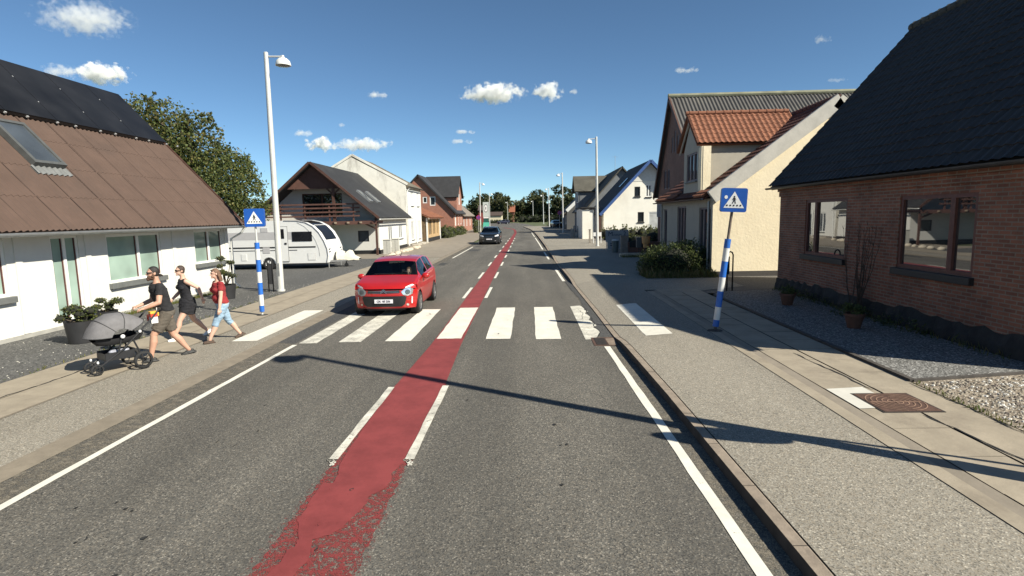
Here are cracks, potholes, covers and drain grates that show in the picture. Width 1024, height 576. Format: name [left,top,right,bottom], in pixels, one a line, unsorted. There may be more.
manhole cover [850,393,946,414]
